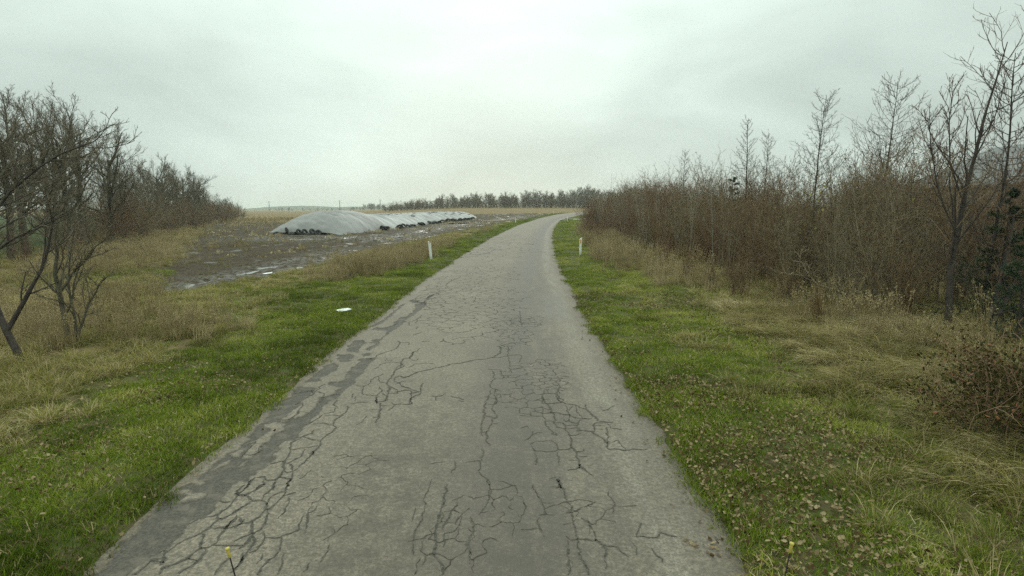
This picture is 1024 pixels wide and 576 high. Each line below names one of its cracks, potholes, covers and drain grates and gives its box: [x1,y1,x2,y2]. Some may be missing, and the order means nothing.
crack [131,236,677,575]
